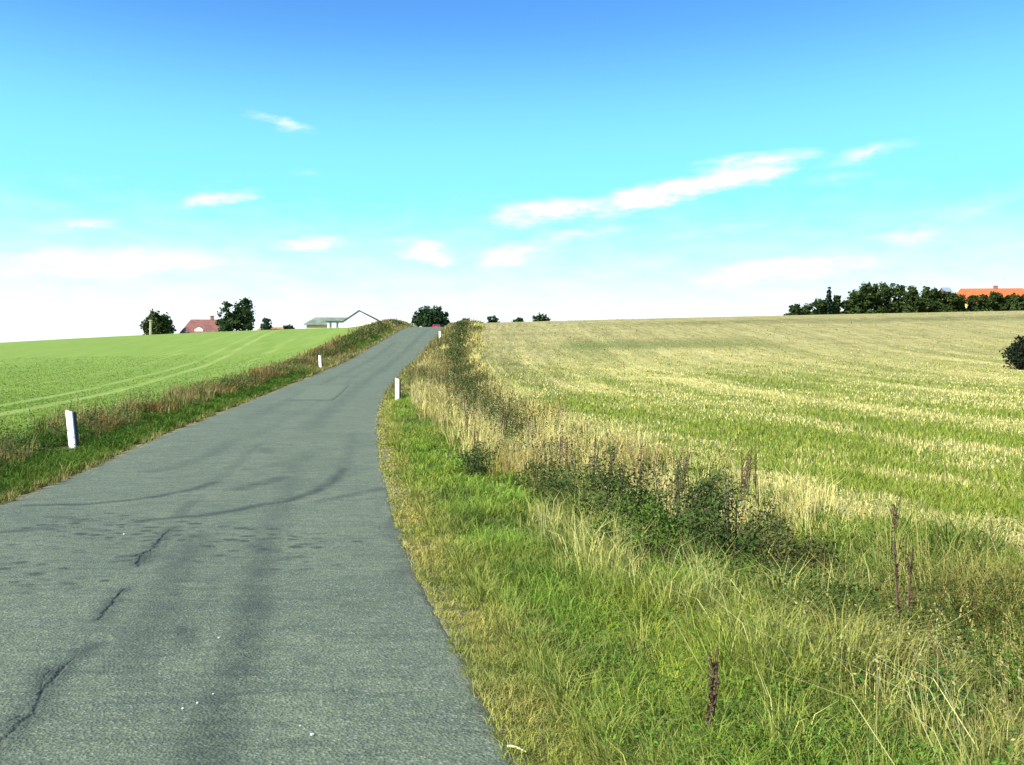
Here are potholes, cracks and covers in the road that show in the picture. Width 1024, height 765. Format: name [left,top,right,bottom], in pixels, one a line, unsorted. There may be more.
crack [0,644,98,750]
crack [112,526,179,567]
crack [95,588,127,620]
